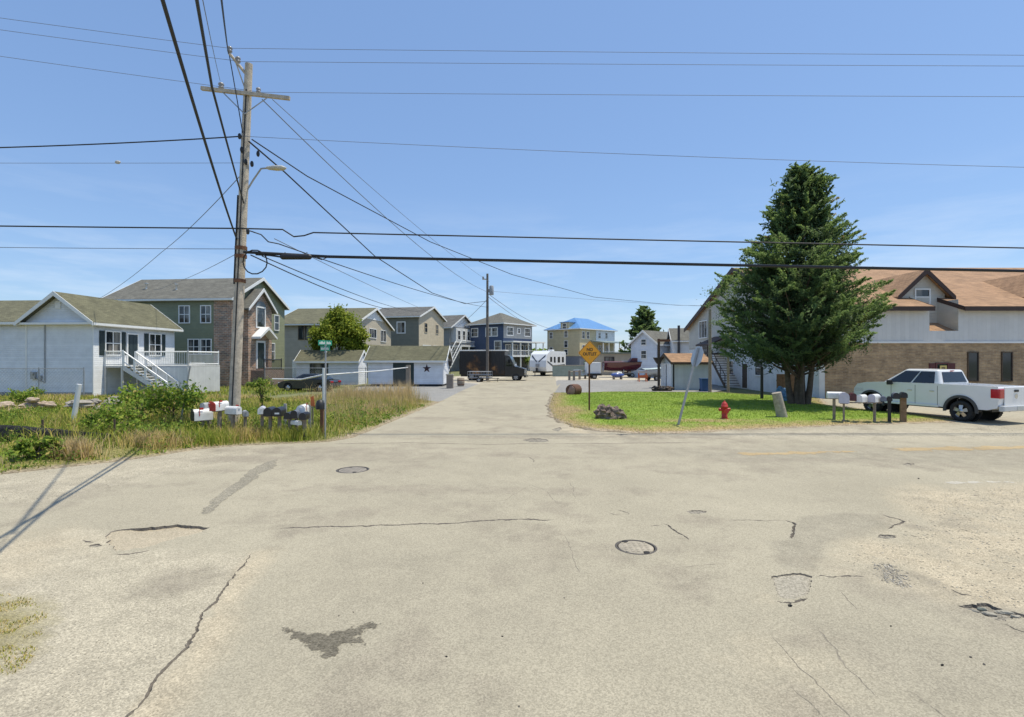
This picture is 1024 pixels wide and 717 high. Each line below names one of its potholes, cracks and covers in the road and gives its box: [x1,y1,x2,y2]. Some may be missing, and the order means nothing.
crack [125,554,251,717]
crack [754,520,796,538]
manhole cover [615,540,657,555]
crack [280,484,574,529]
pothole [959,603,1024,621]
crack [772,631,875,717]
